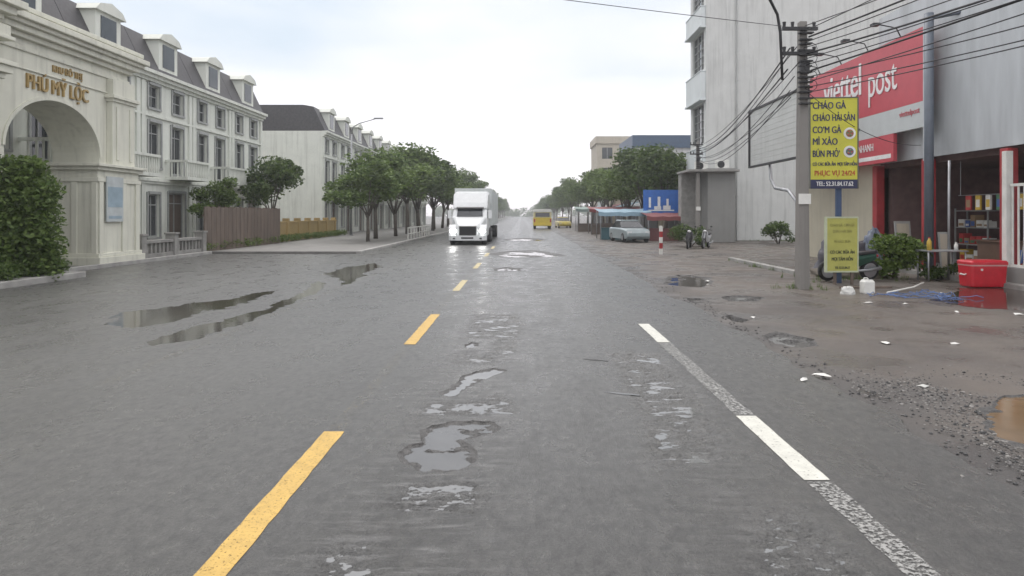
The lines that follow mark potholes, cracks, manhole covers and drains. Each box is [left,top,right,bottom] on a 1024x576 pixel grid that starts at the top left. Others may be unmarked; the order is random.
pothole [439,368,507,397]
pothole [658,275,714,287]
pothole [977,394,1024,449]
pothole [397,420,502,473]
pothole [761,331,819,348]
pothole [724,315,748,323]
pothole [489,250,565,258]
